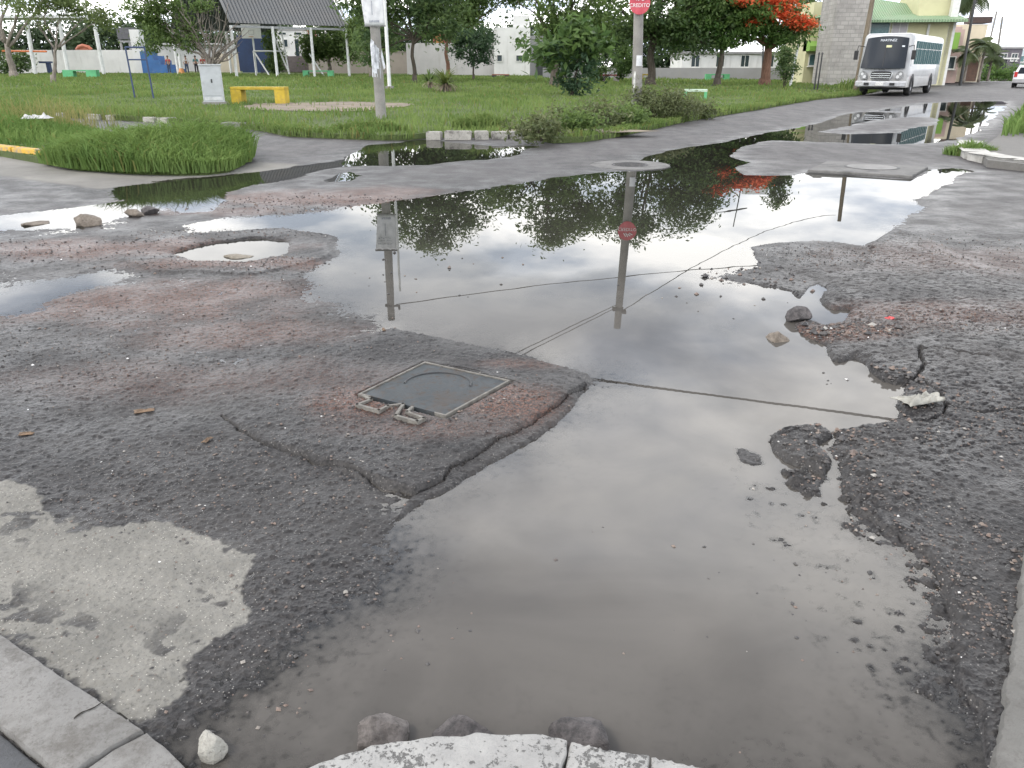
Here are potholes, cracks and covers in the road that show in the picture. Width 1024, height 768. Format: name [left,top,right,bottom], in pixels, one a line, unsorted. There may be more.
manhole cover [590,160,670,170]
crack [907,345,1024,422]
manhole cover [355,361,510,425]
pothole [158,234,301,264]
crack [219,361,587,498]
manhole cover [808,161,928,178]
